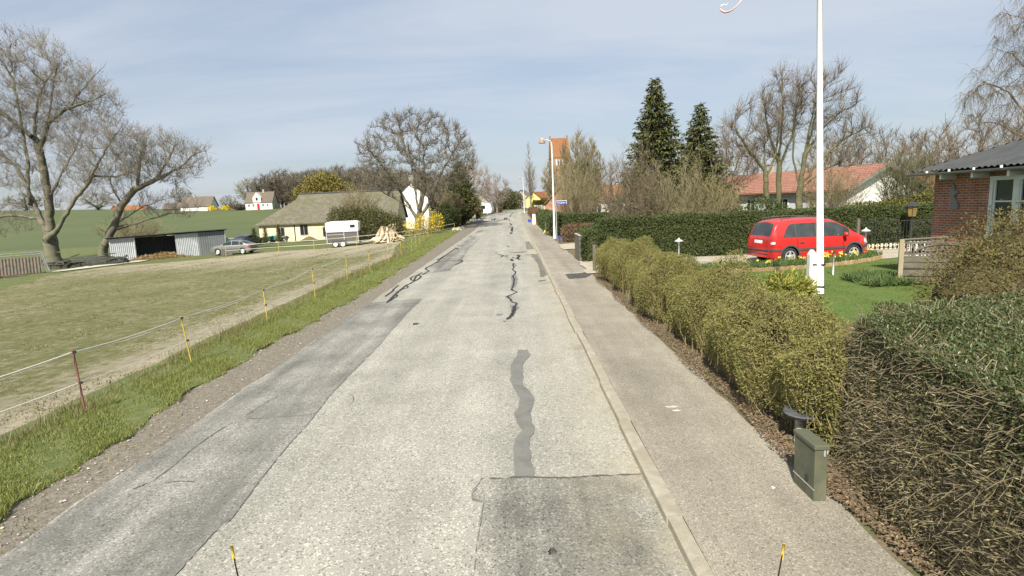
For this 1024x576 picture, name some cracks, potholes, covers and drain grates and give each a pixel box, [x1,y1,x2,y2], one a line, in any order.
crack [134,393,298,489]
